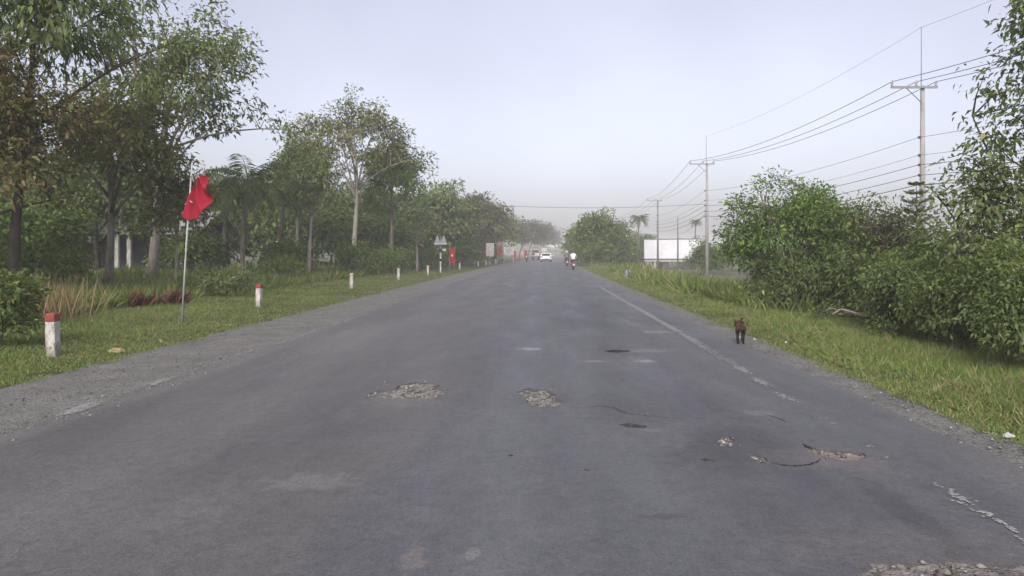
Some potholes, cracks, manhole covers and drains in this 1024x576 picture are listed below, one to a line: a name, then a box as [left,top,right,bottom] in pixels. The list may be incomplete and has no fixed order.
crack [591,406,693,419]
pothole [802,443,866,460]
pothole [364,381,447,399]
pothole [716,436,741,447]
pothole [854,559,1024,576]
pothole [746,453,768,463]
crack [771,459,821,467]
pothole [517,388,563,407]
